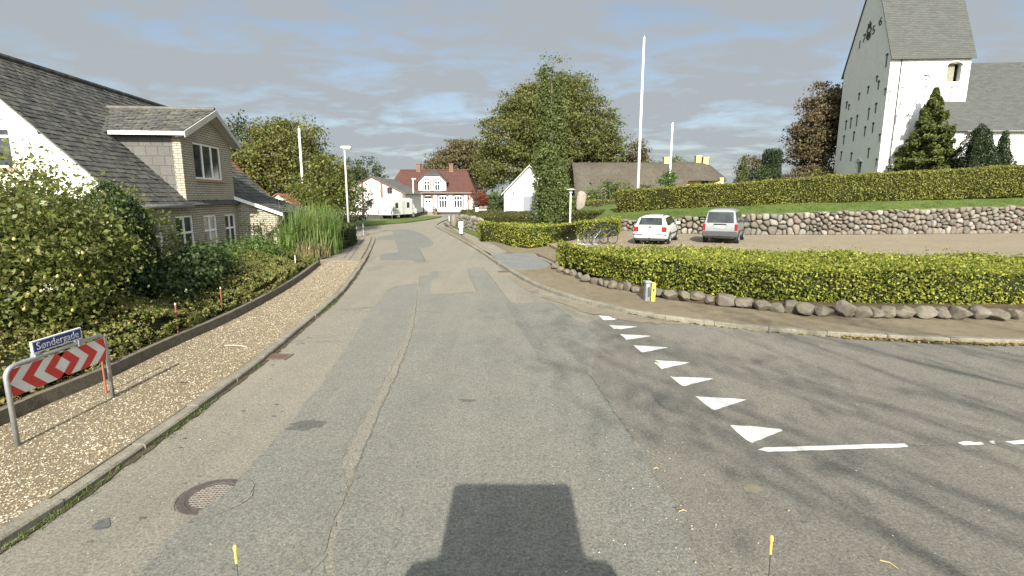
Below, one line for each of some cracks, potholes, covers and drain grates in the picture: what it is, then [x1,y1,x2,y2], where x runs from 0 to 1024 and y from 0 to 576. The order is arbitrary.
manhole cover [176,479,238,516]
